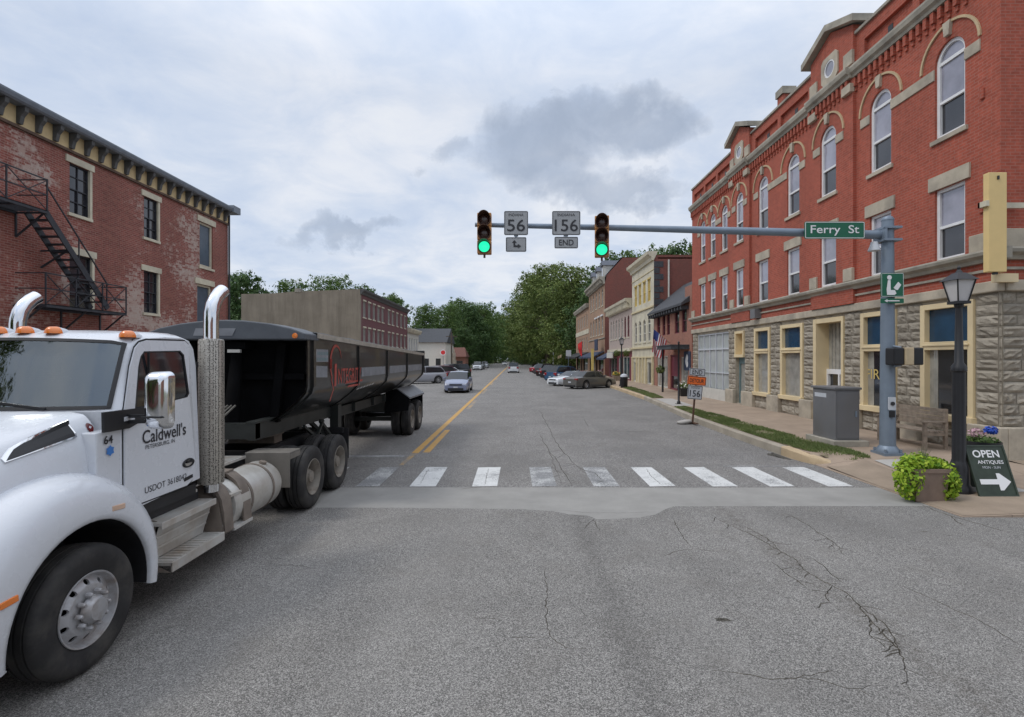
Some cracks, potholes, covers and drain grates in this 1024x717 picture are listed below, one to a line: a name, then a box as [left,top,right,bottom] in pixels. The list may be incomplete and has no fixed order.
crack [517,568,588,649]
crack [710,512,1019,695]
crack [541,412,602,483]
